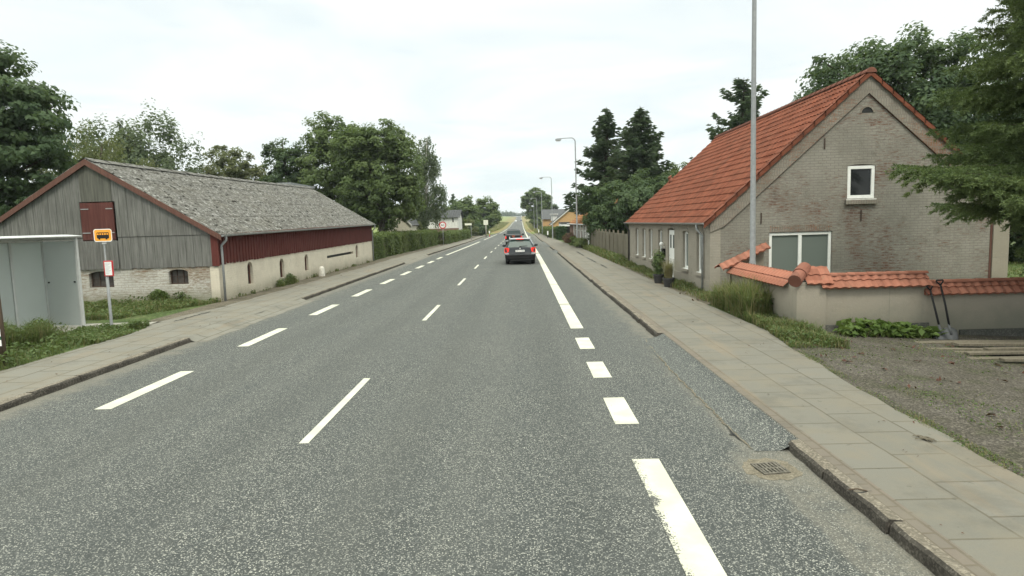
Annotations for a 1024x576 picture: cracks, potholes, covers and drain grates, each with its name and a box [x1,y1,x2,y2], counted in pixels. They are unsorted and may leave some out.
drain grate [750,461,791,475]
